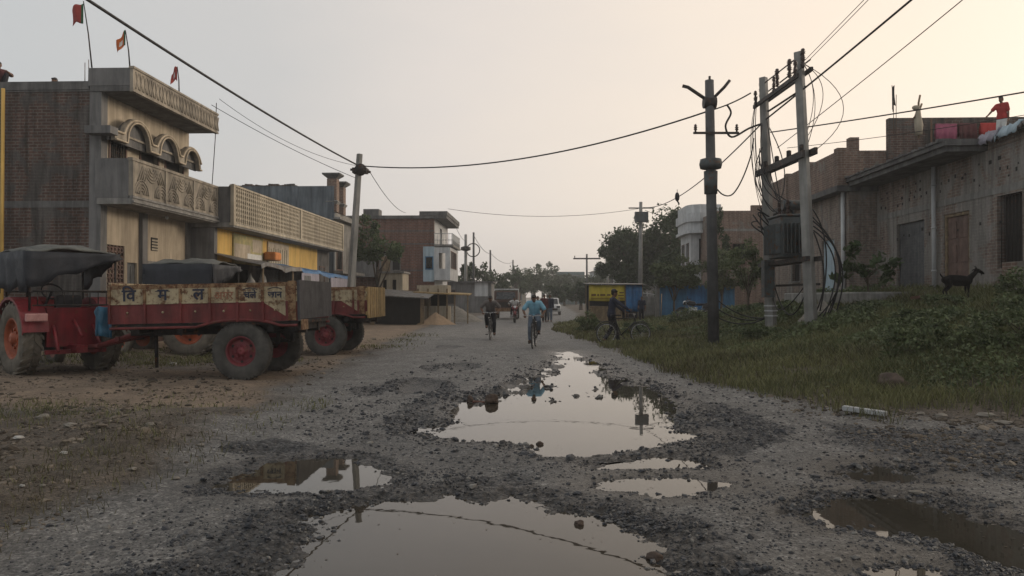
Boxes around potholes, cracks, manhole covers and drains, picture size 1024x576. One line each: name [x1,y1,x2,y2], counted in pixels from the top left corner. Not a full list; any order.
pothole [415,350,718,465]
pothole [767,486,1024,576]
pothole [570,450,733,475]
pothole [195,449,419,497]
pothole [568,472,757,500]
pothole [218,487,752,576]
pothole [815,457,947,485]
